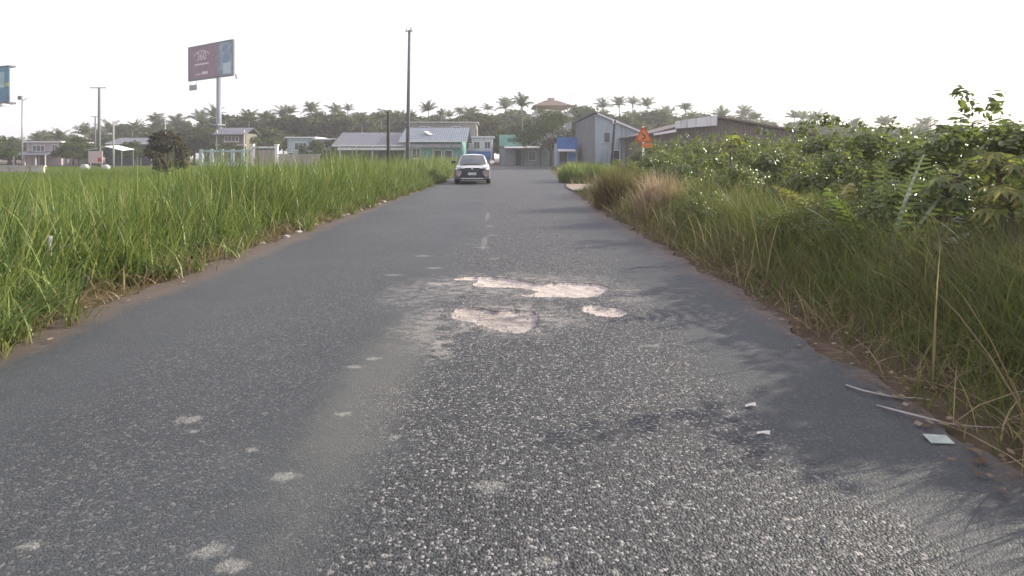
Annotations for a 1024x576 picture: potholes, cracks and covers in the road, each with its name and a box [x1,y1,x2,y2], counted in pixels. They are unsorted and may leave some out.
pothole [580,304,629,317]
pothole [453,276,610,298]
pothole [450,307,540,334]
